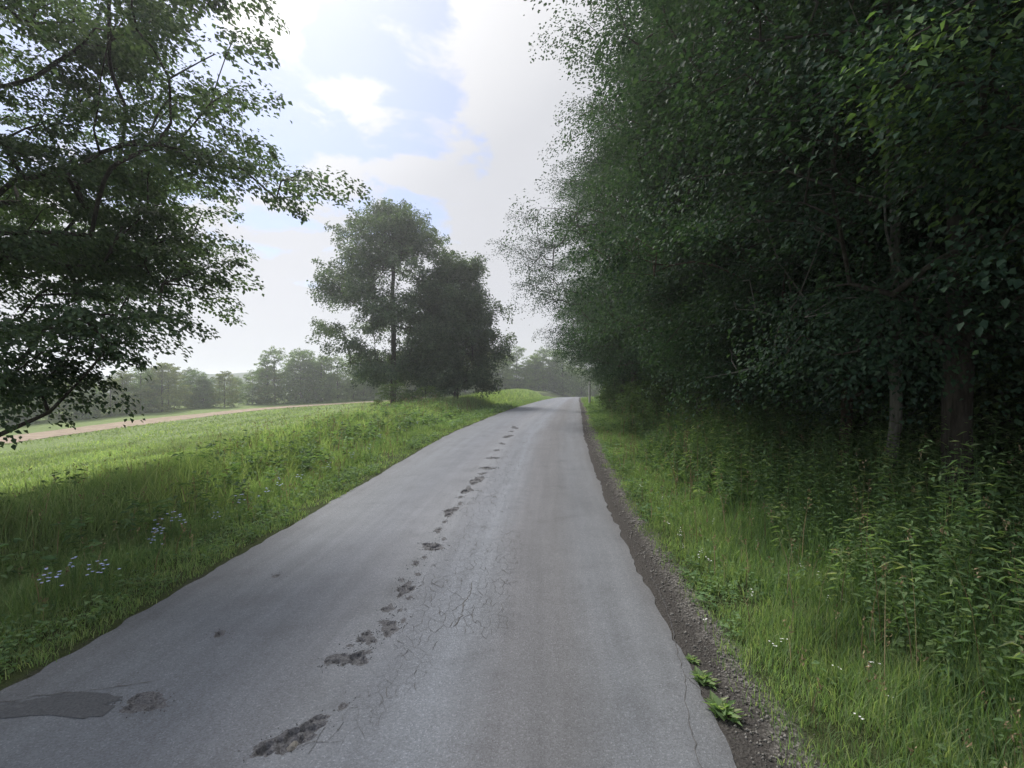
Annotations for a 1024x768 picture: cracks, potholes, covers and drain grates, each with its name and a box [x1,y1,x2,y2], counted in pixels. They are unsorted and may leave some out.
pothole [355,630,378,646]
pothole [381,620,400,637]
pothole [422,543,445,551]
pothole [396,581,416,599]
crack [302,433,541,754]
pothole [118,691,168,714]
pothole [324,650,370,667]
pothole [248,714,331,758]
